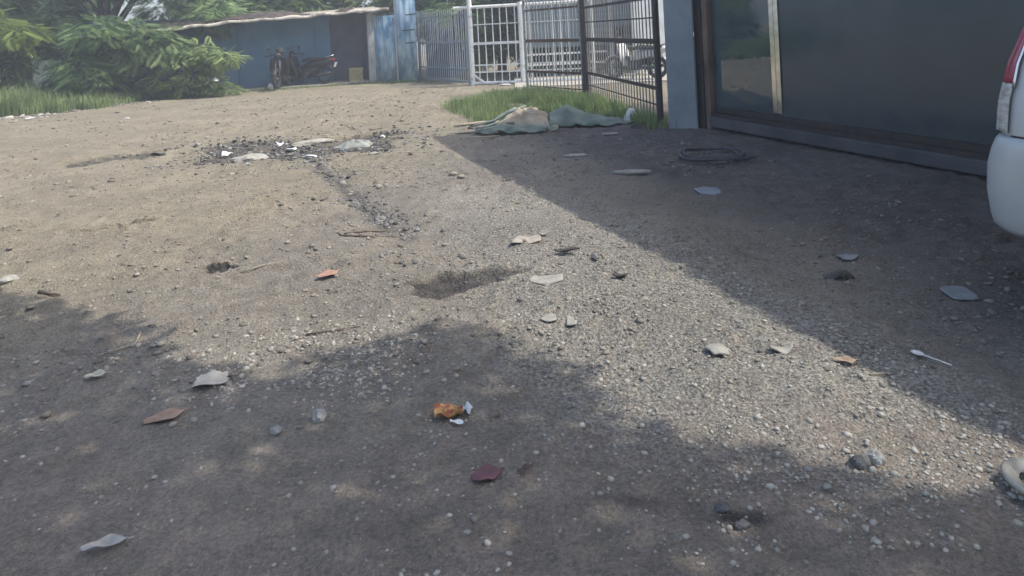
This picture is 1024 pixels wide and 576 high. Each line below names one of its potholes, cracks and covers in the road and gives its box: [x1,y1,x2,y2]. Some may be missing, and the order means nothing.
pothole [200,261,246,277]
pothole [151,126,442,170]
pothole [387,261,546,304]
